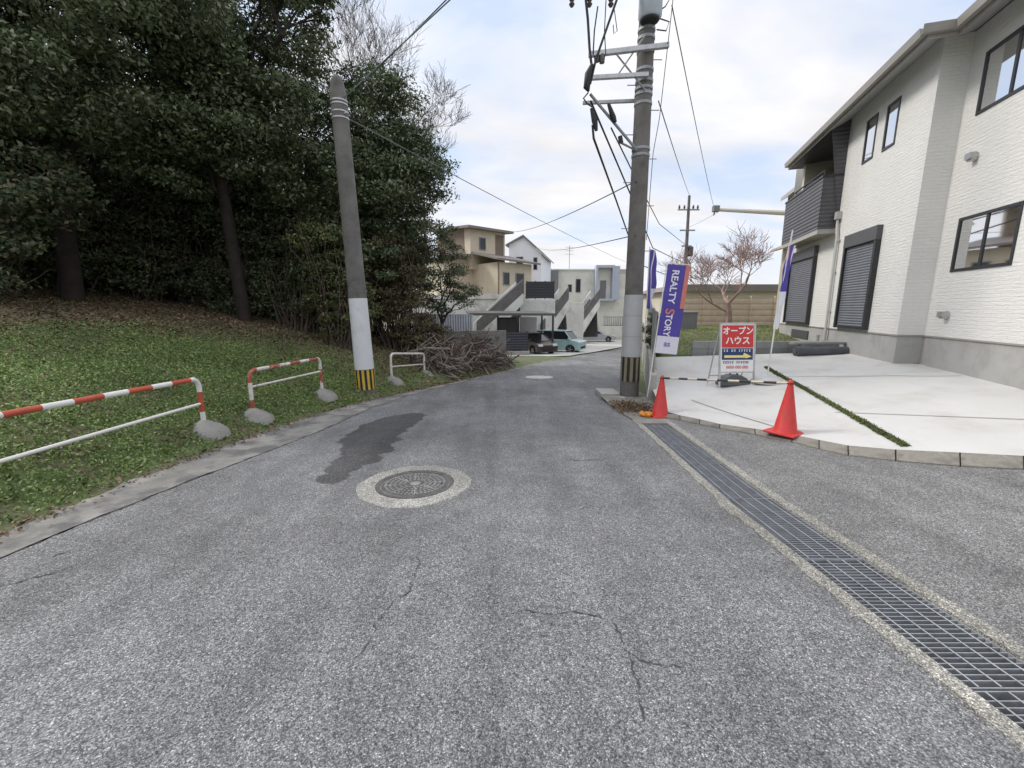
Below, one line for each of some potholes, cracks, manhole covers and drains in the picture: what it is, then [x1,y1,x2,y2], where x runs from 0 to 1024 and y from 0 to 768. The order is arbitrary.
crack [354,558,429,658]
drain grate [806,559,1024,691]
drain grate [661,440,722,464]
drain grate [687,463,771,499]
drain grate [728,499,863,560]
drain grate [643,424,690,441]
manhole cover [356,465,472,508]
drain grate [975,691,1024,729]
crack [514,609,690,724]
